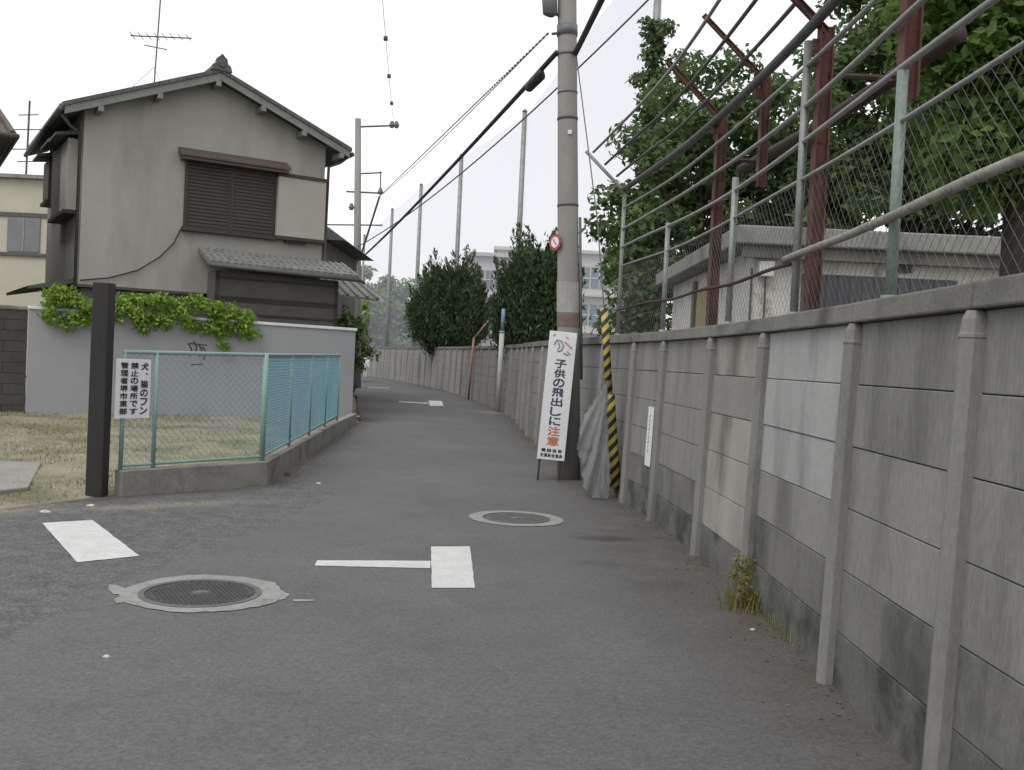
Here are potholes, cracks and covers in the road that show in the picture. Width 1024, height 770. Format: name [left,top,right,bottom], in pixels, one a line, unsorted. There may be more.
manhole cover [109,575,290,612]
manhole cover [469,510,563,526]
